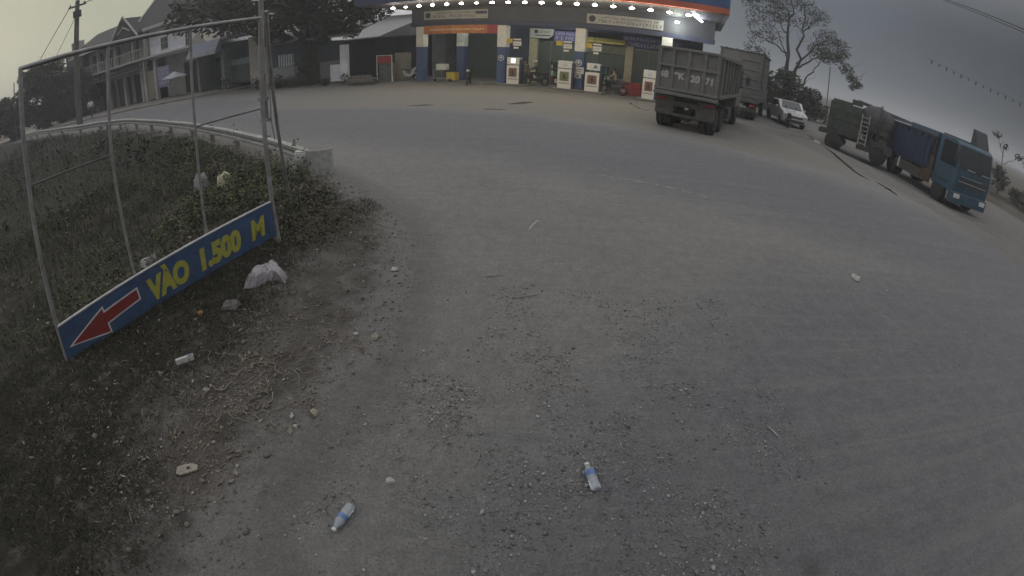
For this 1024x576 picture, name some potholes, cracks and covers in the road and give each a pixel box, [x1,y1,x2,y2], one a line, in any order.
crack [808,135,897,195]
